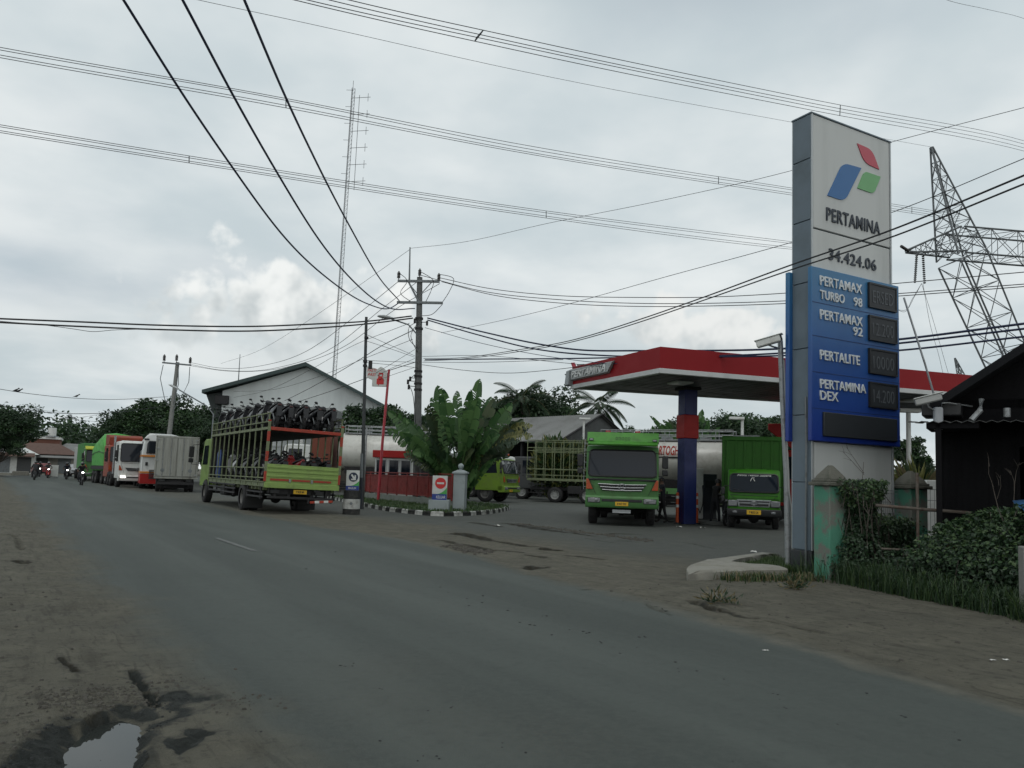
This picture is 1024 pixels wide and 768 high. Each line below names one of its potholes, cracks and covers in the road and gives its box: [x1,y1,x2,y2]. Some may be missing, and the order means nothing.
pothole [0,689,223,768]
